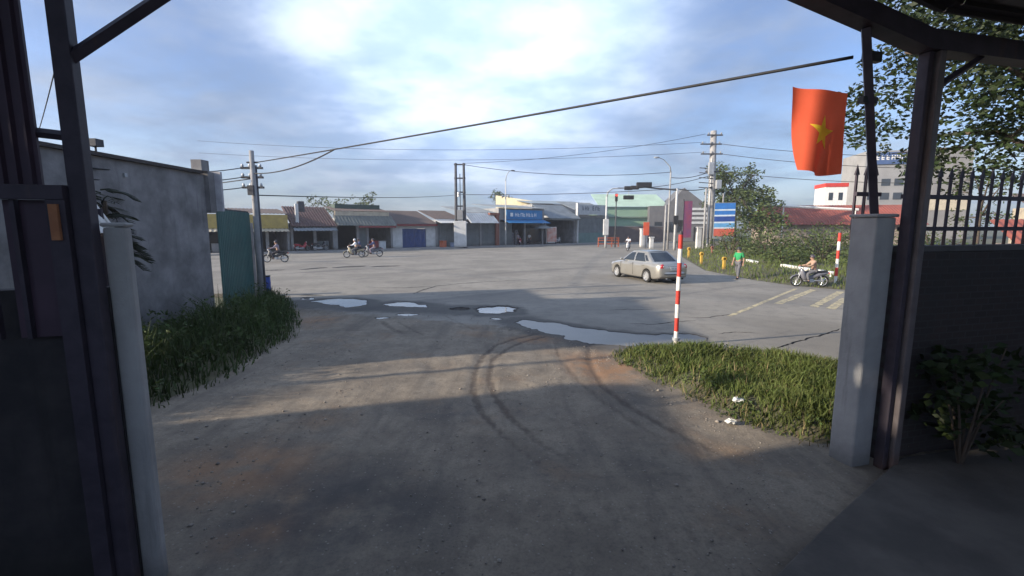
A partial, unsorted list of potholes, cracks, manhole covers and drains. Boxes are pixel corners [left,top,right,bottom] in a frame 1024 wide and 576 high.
crack [621,309,752,334]
pothole [309,298,369,308]
crack [777,329,839,348]
pothole [514,319,708,347]
pothole [473,305,519,314]
